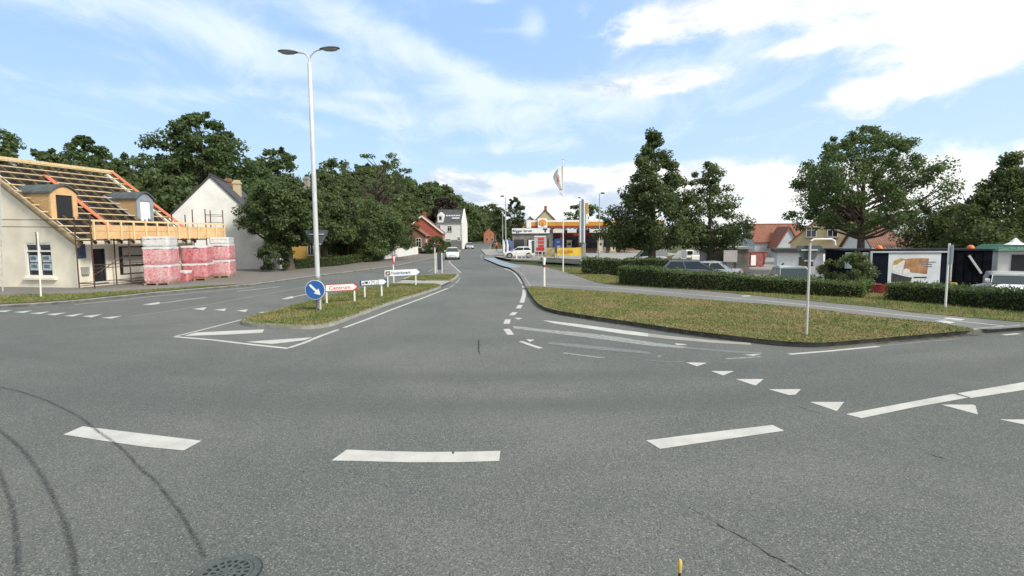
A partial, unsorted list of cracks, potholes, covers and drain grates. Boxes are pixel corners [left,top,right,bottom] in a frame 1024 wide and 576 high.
crack [687,506,807,575]
manhole cover [190,554,263,576]
